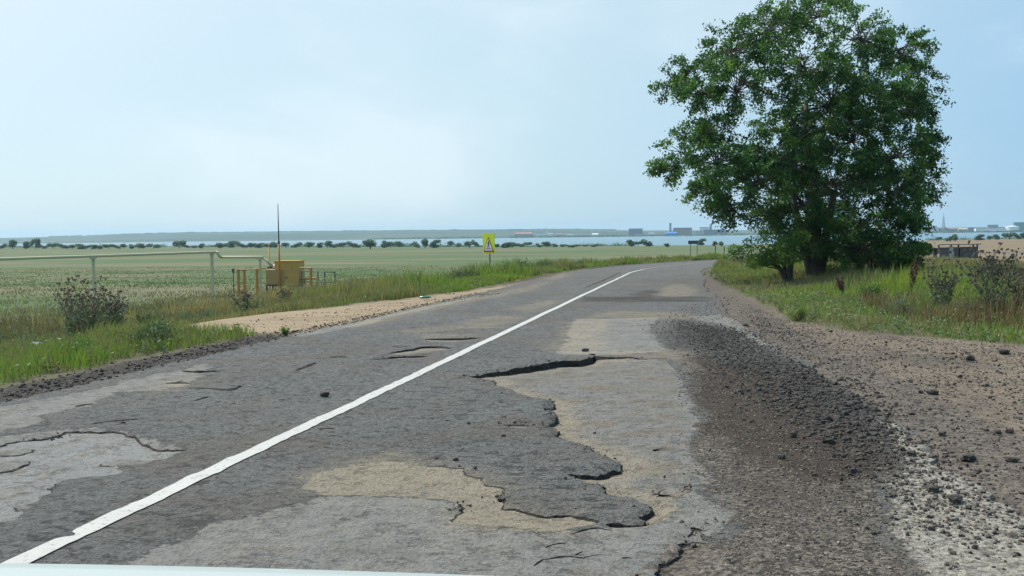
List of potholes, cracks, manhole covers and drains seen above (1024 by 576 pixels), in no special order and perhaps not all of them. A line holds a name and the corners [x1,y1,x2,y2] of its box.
crack [533,527,611,566]
pothole [470,354,696,529]
pothole [300,461,600,532]
